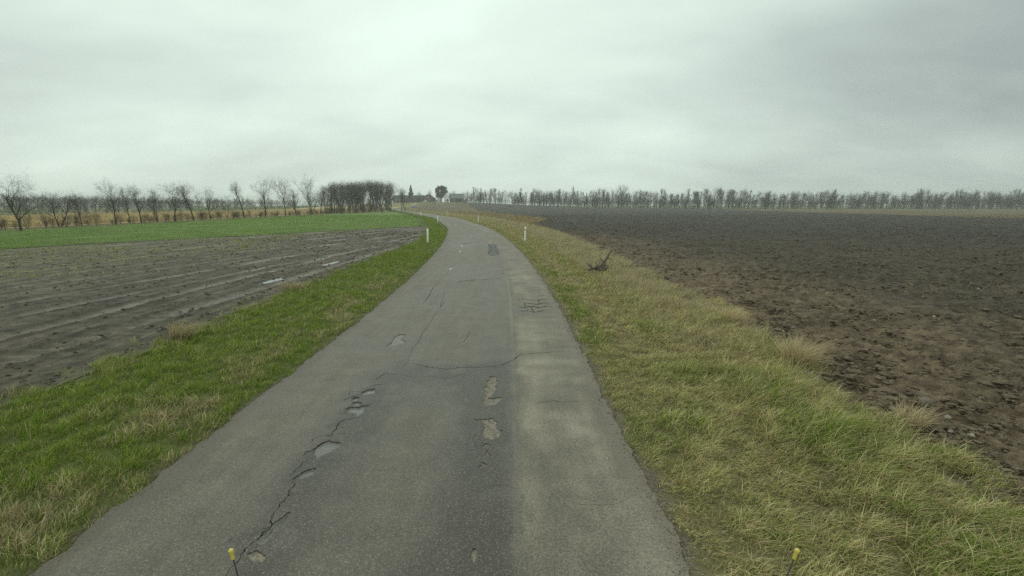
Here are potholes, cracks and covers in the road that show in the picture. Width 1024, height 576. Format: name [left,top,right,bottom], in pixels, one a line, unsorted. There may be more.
pothole [475,418,503,440]
